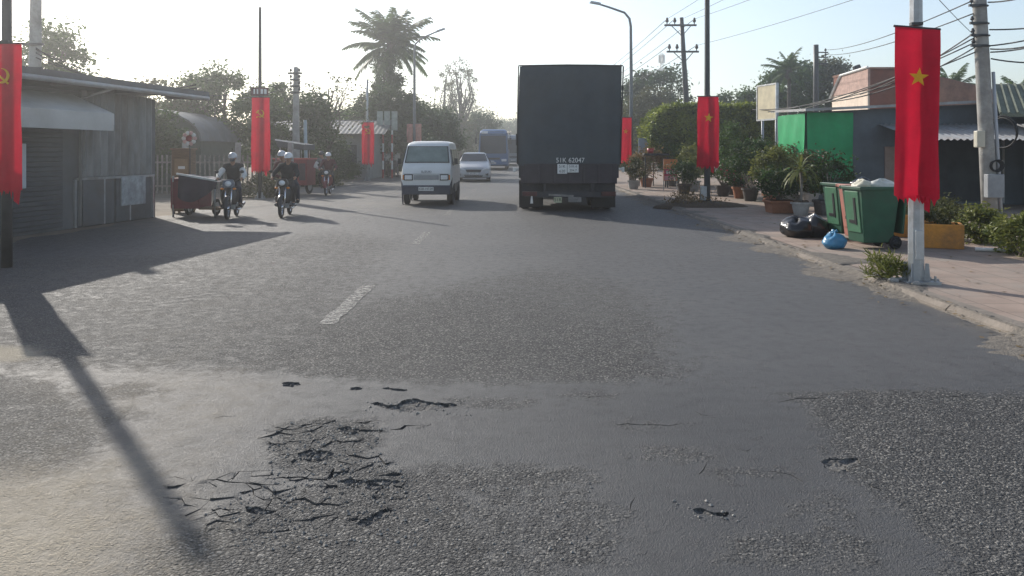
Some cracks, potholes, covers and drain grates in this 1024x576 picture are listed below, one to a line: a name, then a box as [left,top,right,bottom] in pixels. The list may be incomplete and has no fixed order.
pothole [371,398,457,412]
crack [163,420,431,533]
pothole [821,458,860,471]
pothole [693,508,730,517]
